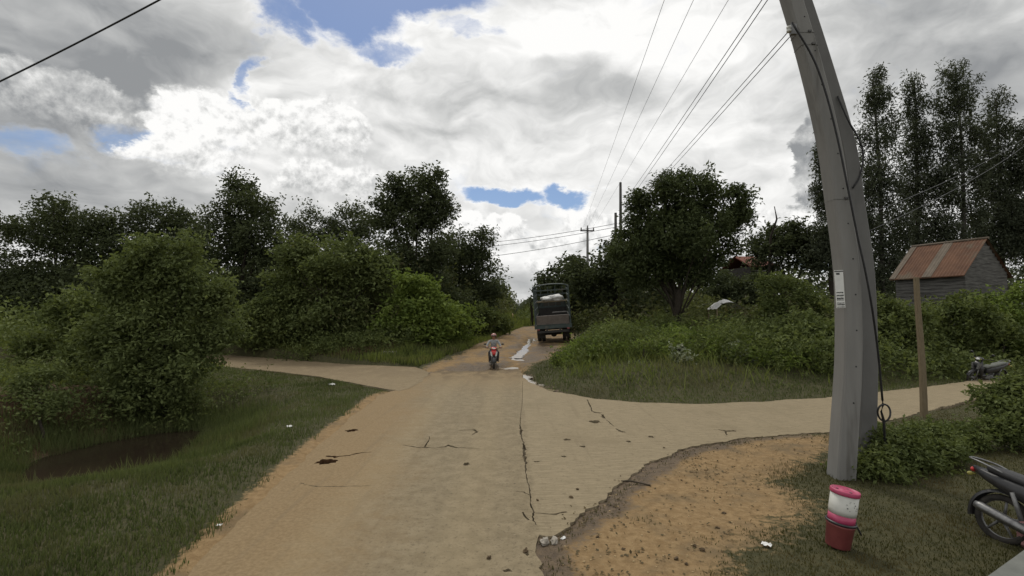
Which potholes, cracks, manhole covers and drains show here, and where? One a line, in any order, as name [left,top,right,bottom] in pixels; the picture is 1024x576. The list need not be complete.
crack [405,429,478,448]
